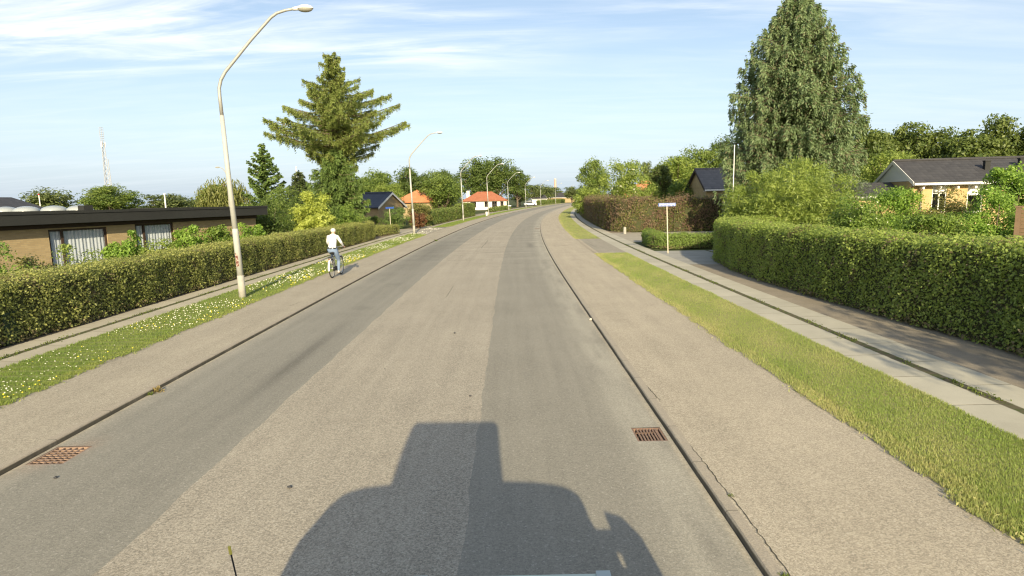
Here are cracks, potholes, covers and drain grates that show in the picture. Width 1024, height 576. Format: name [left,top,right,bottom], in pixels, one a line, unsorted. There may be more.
drain grate [631,427,668,441]
crack [691,446,791,576]
drain grate [26,446,92,465]
